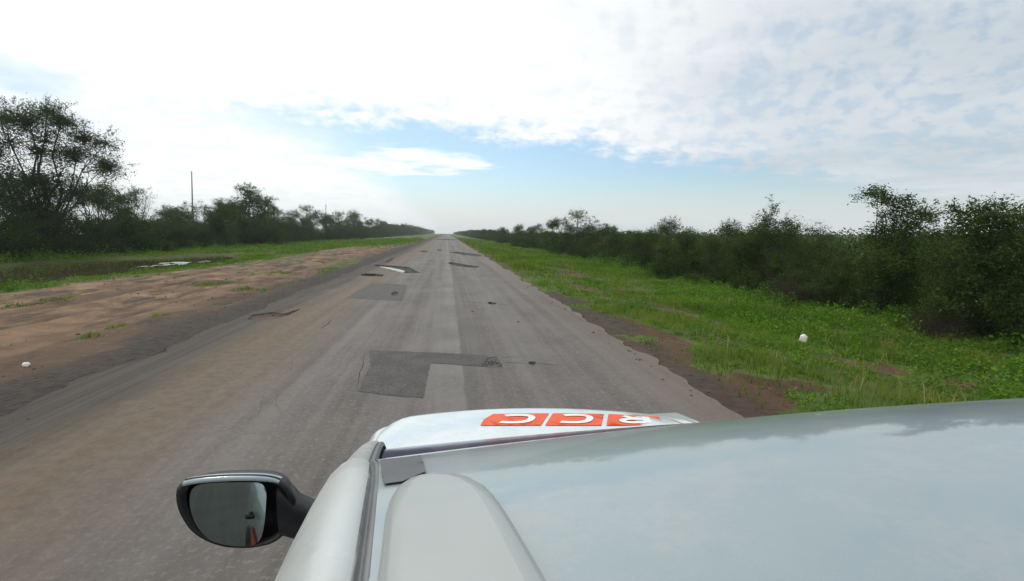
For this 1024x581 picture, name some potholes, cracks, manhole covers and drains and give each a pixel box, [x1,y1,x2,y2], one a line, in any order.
pothole [248,309,299,320]
pothole [482,356,503,368]
pothole [375,265,421,273]
